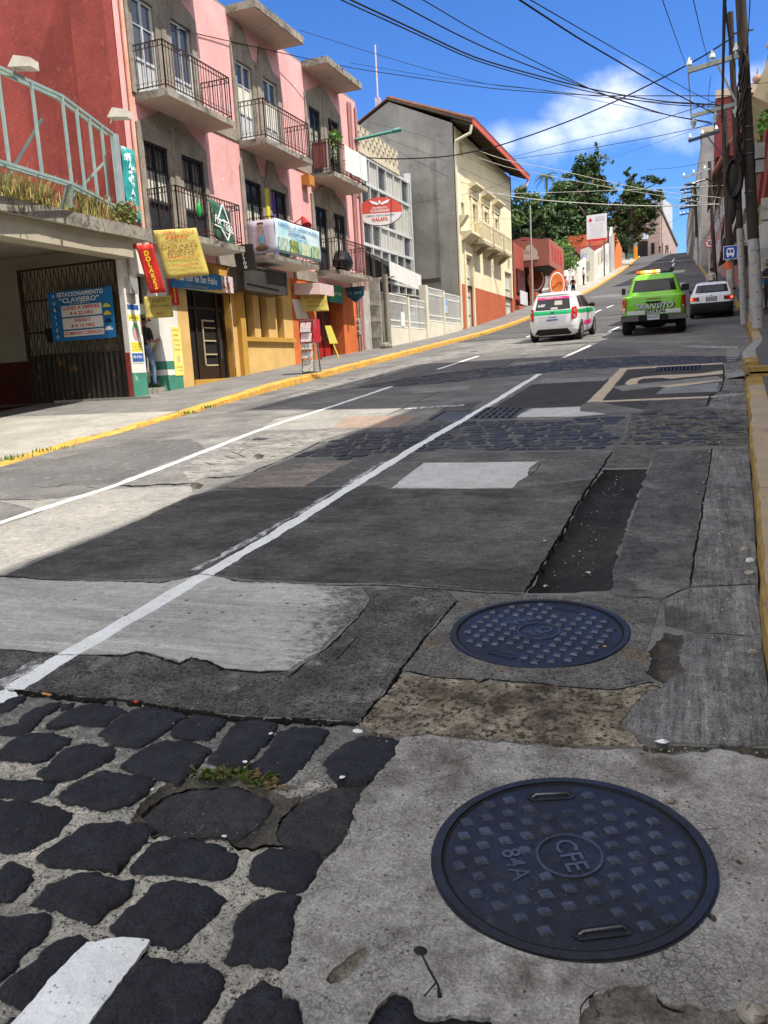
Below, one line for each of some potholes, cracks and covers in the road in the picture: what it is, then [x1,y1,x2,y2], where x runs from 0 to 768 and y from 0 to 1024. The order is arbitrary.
manhole cover [431,777,720,964]
crack [0,452,658,599]
pothole [646,633,685,684]
pothole [131,775,348,860]
drain grate [469,407,528,419]
manhole cover [450,599,631,668]
